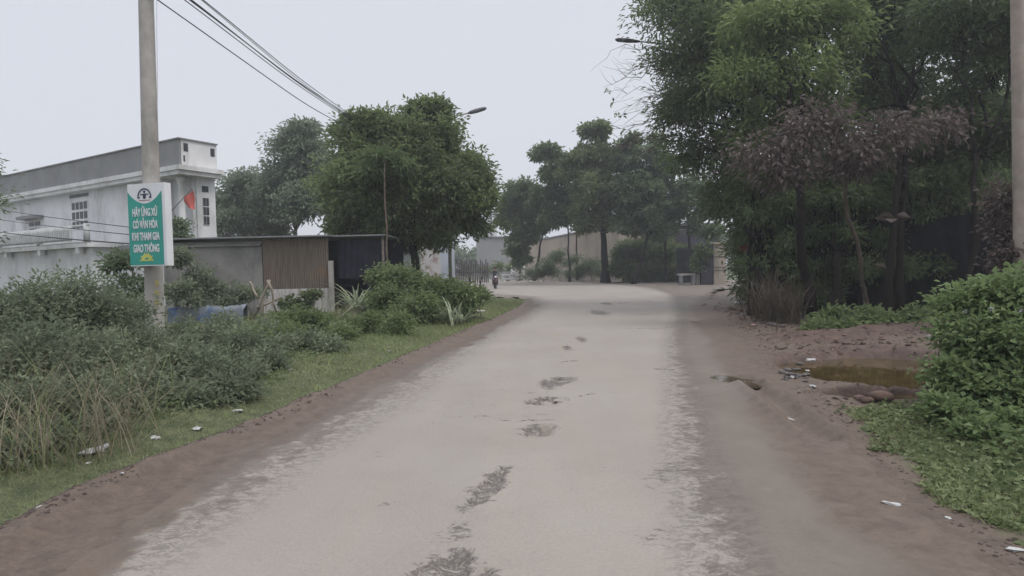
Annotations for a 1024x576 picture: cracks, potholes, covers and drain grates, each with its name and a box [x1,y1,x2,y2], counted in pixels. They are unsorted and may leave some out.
pothole [572,335,591,345]
pothole [524,372,585,395]
pothole [583,309,619,318]
pothole [514,393,580,411]
pothole [506,420,570,442]
pothole [444,457,524,529]
pothole [560,344,575,353]
pothole [368,542,517,576]
